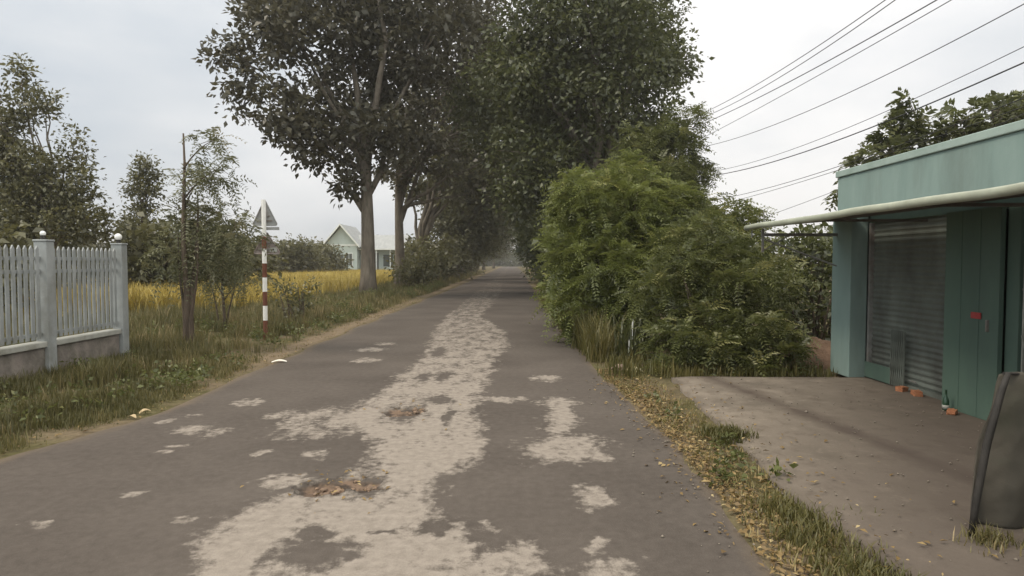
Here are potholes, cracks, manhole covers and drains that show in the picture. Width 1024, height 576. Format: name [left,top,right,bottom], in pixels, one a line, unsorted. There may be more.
pothole [377,405,432,417]
pothole [291,473,391,499]
